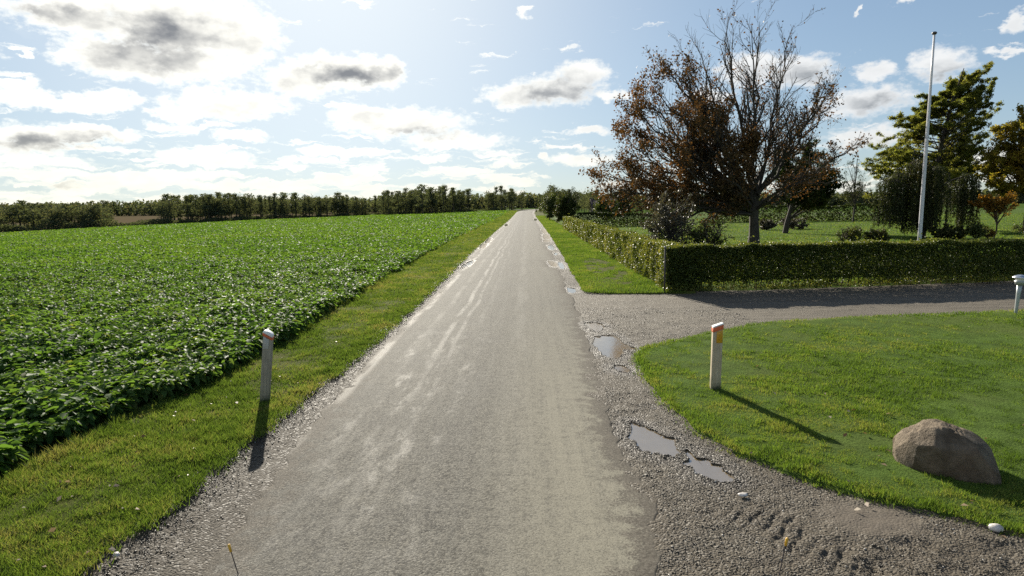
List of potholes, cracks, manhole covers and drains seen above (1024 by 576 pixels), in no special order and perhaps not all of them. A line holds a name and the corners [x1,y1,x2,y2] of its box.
pothole [585,322,605,331]
pothole [628,421,682,456]
pothole [592,334,638,359]
pothole [683,450,735,482]
